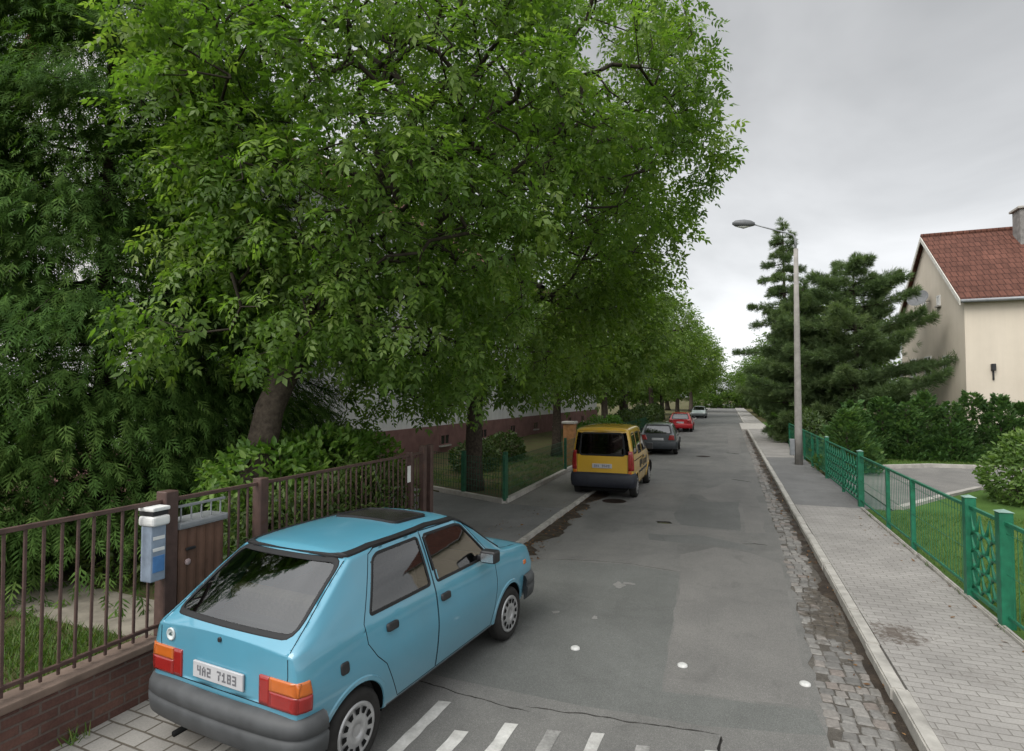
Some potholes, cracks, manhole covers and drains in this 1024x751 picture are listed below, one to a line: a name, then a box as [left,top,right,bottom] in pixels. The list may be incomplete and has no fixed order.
crack [421,681,723,751]
